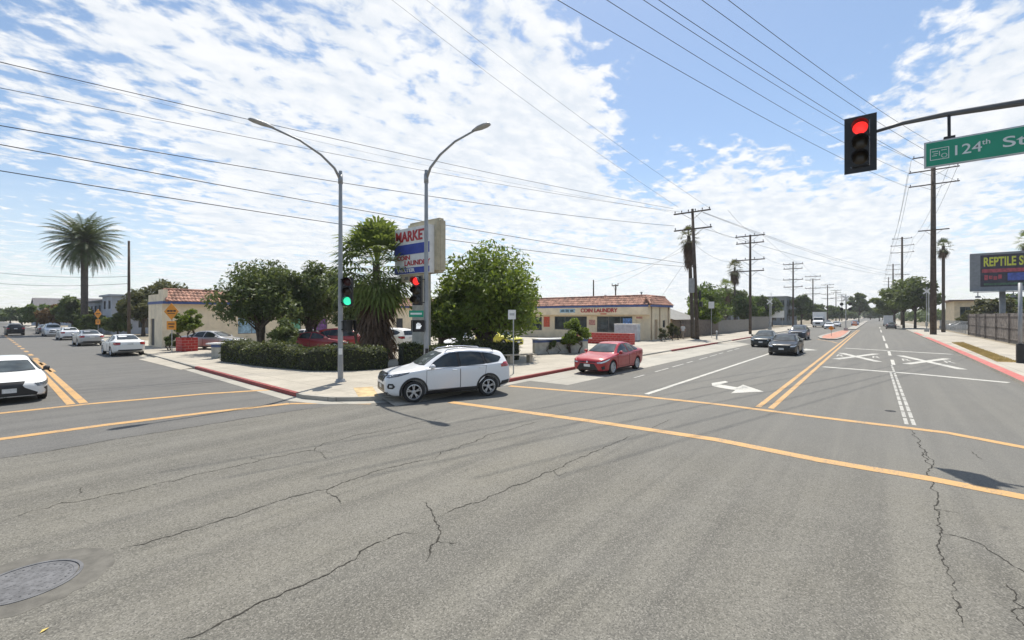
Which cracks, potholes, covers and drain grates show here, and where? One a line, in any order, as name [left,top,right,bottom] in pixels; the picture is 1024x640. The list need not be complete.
crack [132,421,538,546]
crack [912,431,1024,625]
manhole cover [0,548,115,618]
crack [16,419,436,517]
crack [422,435,634,558]
crack [182,532,415,639]
